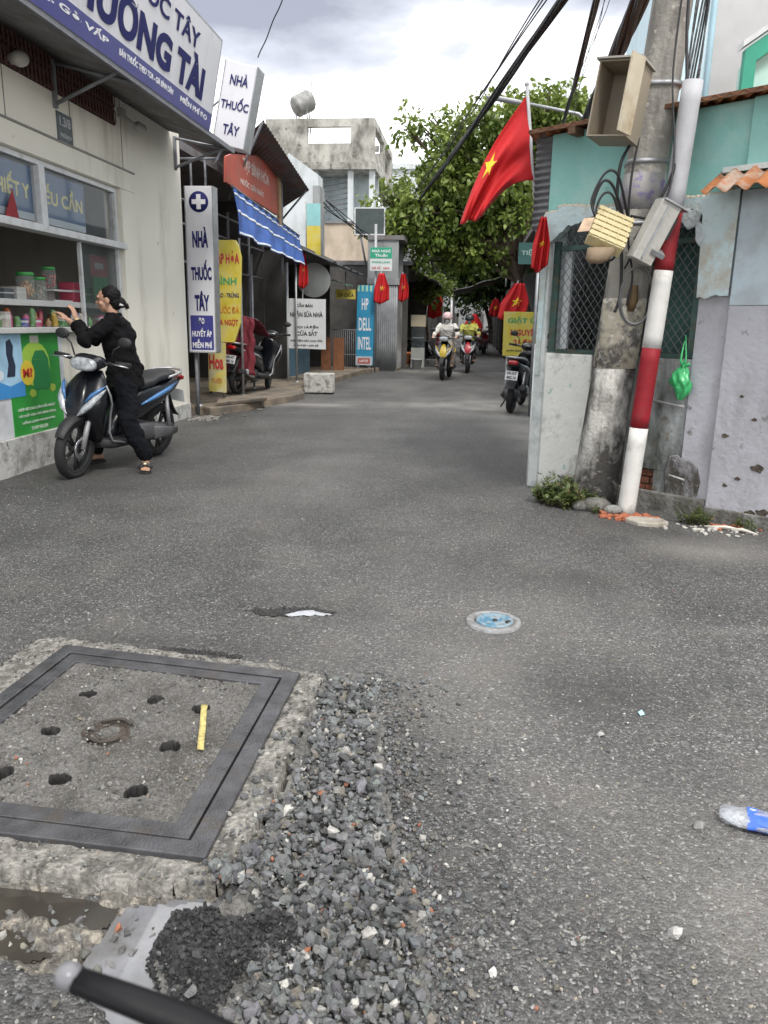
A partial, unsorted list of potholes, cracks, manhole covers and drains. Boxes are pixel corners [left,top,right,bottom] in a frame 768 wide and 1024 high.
manhole cover [0,636,324,903]
manhole cover [466,611,521,634]
pothole [244,606,335,617]
